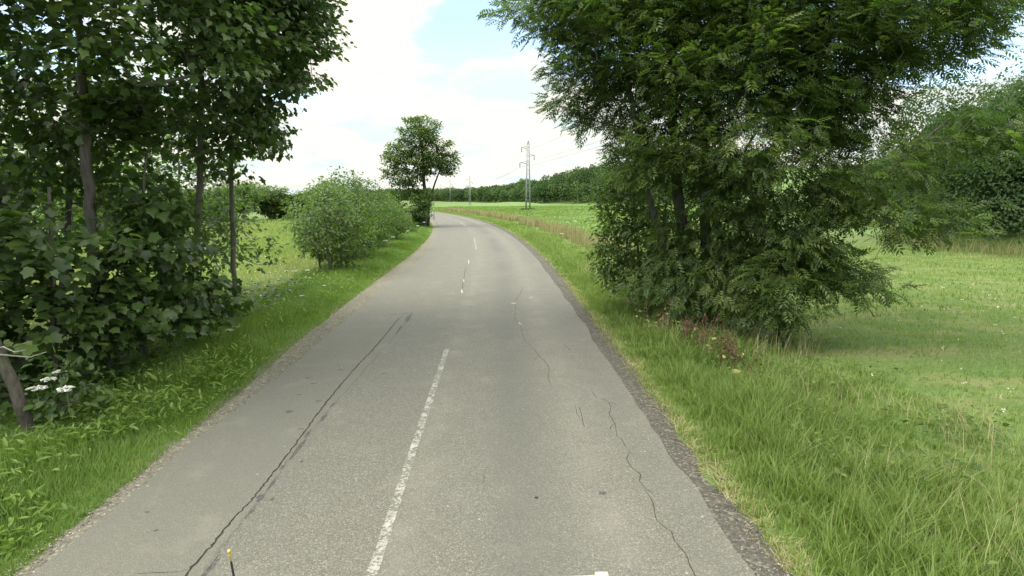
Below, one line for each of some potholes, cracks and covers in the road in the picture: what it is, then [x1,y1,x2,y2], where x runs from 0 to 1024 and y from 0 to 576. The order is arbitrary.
crack [575,392,696,576]
